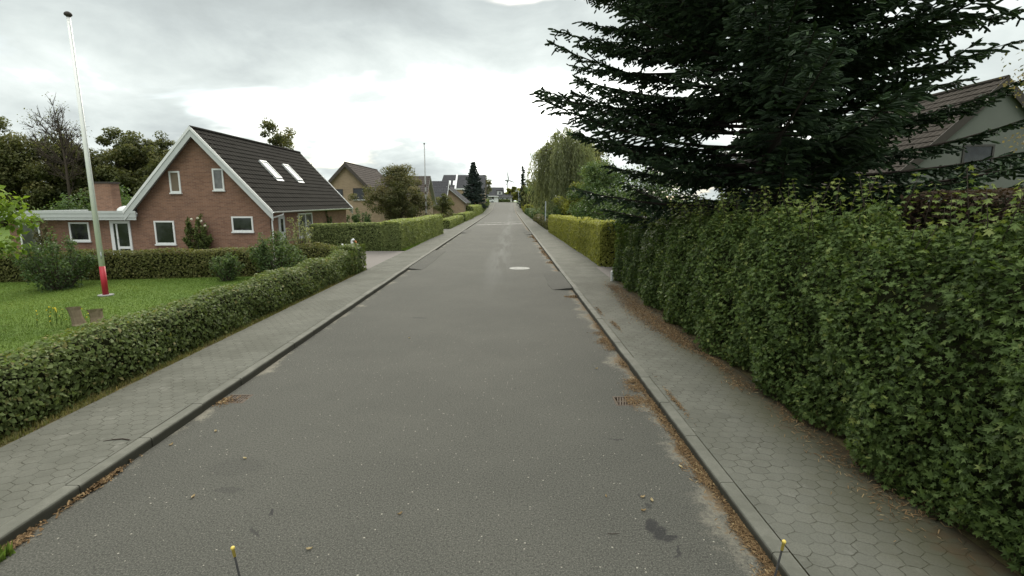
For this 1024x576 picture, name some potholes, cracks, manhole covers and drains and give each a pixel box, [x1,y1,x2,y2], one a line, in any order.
drain grate [612,396,640,406]
drain grate [224,394,253,403]
